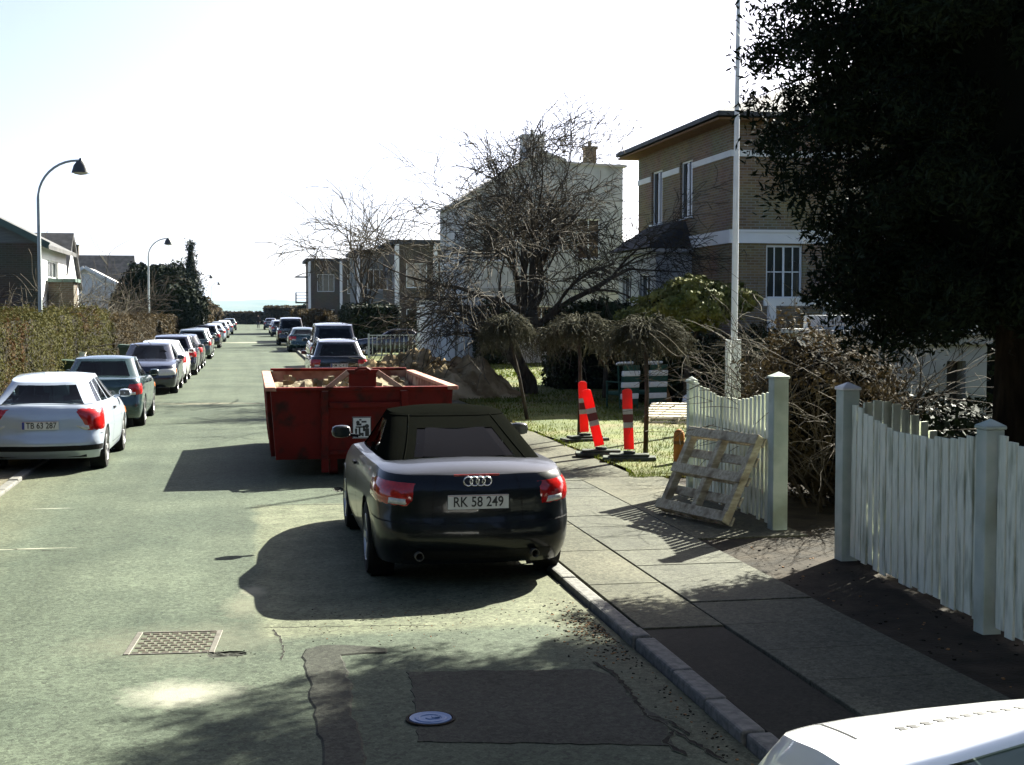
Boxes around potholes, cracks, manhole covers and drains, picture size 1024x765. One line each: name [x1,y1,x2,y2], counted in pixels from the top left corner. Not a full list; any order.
crack [272,629,285,661]
manhole cover [405,711,455,726]
crack [593,662,728,762]
